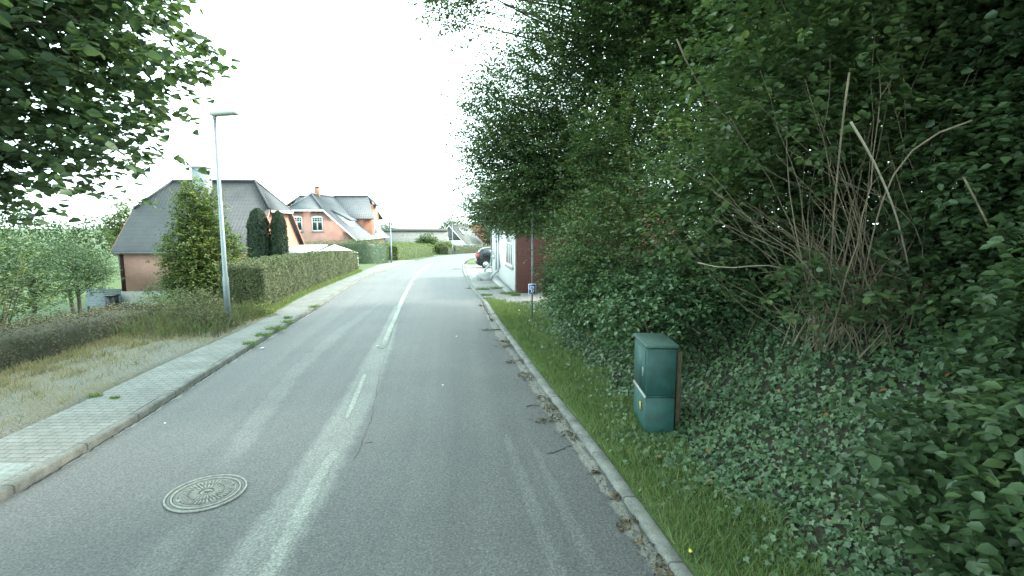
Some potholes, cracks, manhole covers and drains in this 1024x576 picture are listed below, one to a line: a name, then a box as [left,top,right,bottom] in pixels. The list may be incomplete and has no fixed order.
manhole cover [162,474,248,513]
